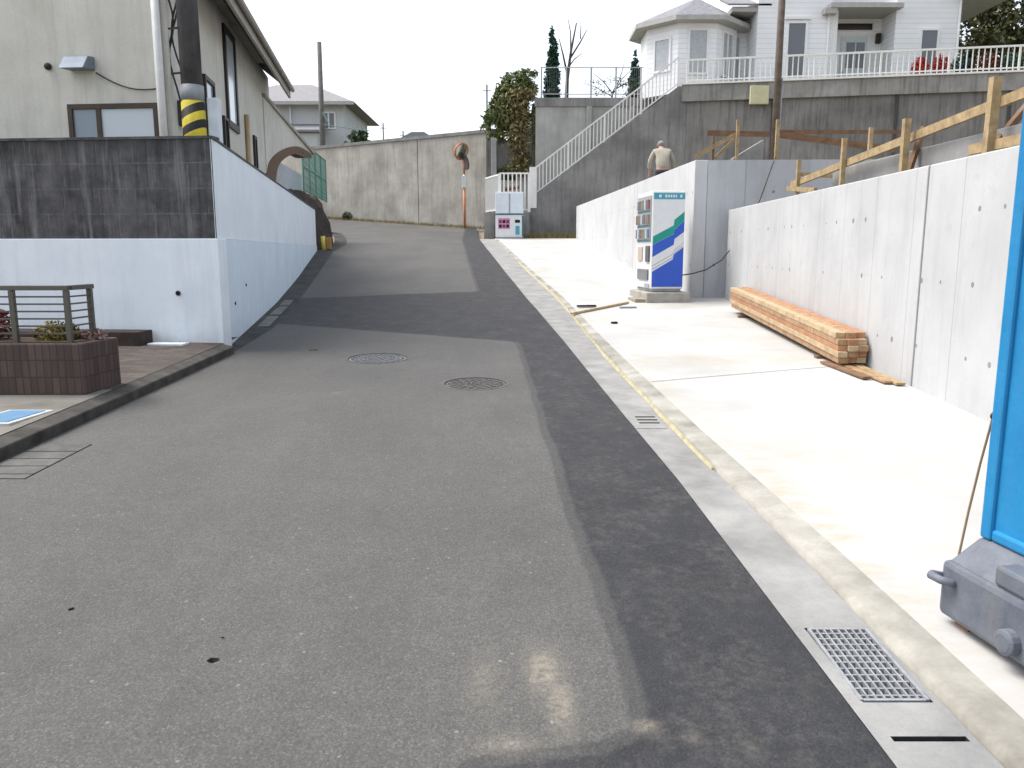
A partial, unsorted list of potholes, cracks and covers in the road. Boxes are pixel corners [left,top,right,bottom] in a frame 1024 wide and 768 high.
manhole cover [346,353,410,364]
drain grate [807,628,930,702]
manhole cover [441,377,509,390]
